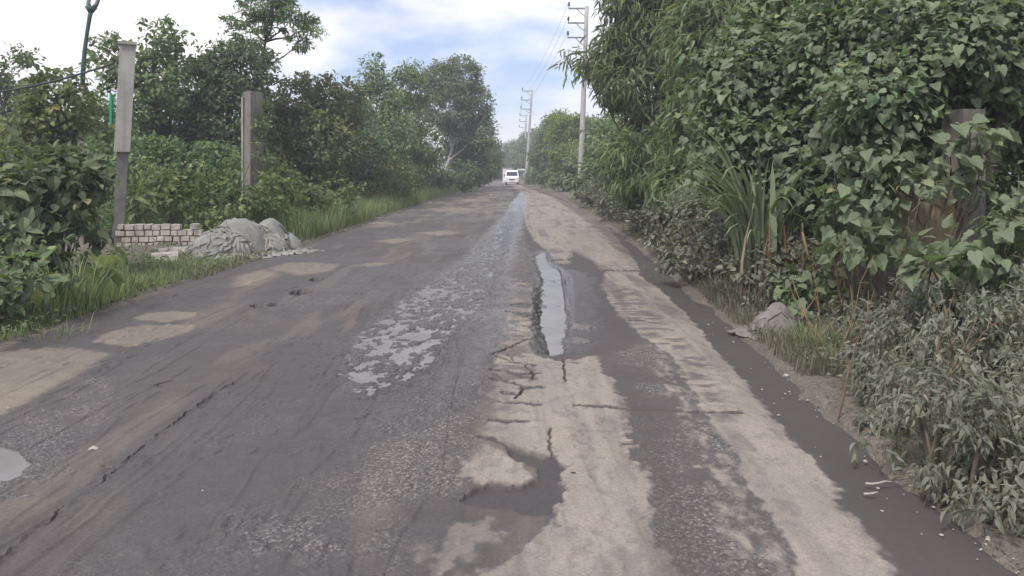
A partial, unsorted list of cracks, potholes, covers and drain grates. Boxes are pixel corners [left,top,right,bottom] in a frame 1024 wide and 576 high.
pothole [289,288,313,296]
pothole [529,250,576,357]
crack [149,380,174,388]
crack [488,339,580,399]
pothole [459,445,567,516]
crack [476,418,554,456]
pothole [0,440,42,481]
crack [0,382,234,561]
